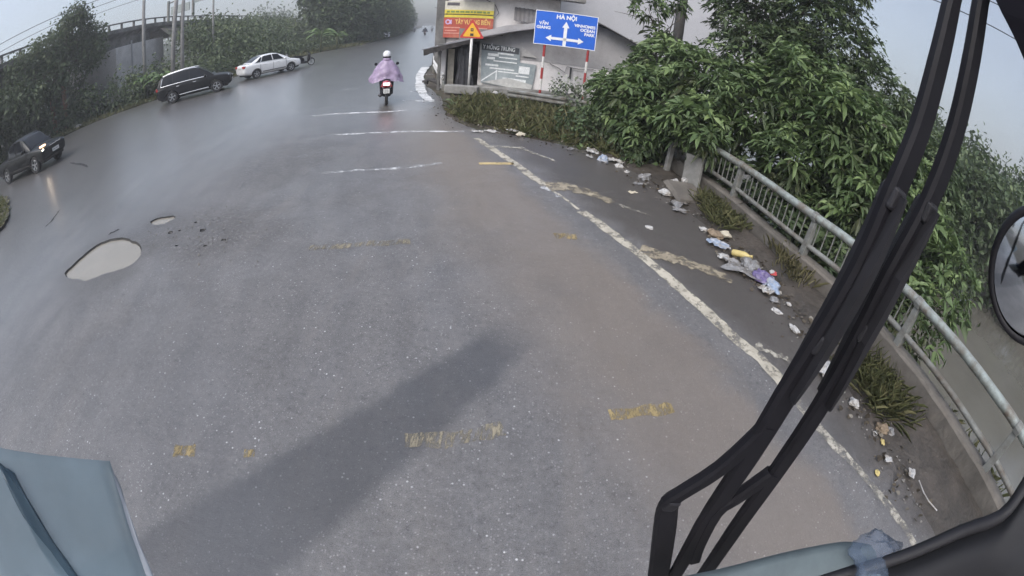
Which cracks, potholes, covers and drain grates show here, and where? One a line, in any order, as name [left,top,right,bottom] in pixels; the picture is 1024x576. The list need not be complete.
pothole [150,216,175,225]
pothole [64,237,142,281]
